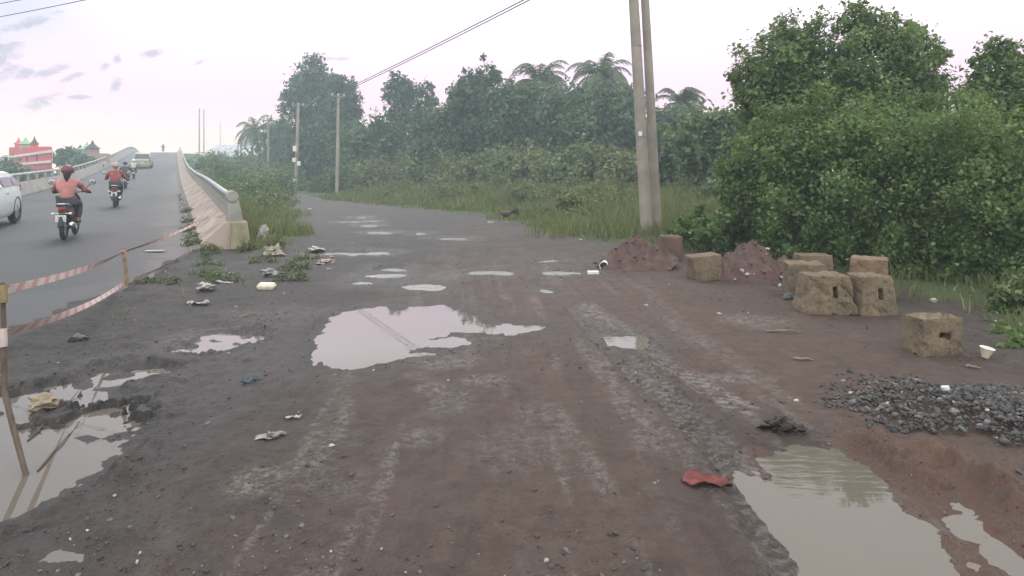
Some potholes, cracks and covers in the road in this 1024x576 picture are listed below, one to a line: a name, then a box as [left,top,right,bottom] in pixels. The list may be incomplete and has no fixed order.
pothole [717,434,969,576]
pothole [595,331,658,352]
pothole [77,366,177,390]
pothole [301,303,551,371]
pothole [0,375,161,522]
pothole [398,283,453,291]
pothole [466,268,519,276]
pothole [922,492,1024,576]
pothole [166,326,273,358]
